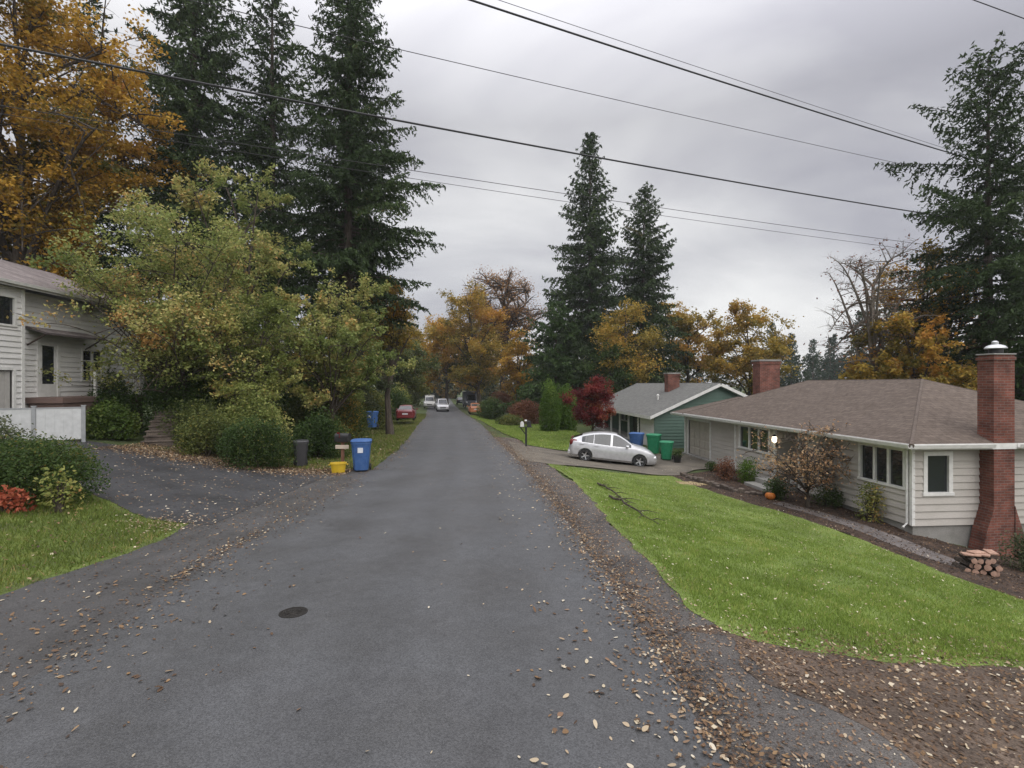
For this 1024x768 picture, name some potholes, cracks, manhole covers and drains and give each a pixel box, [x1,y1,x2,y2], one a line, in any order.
manhole cover [278,607,308,618]
